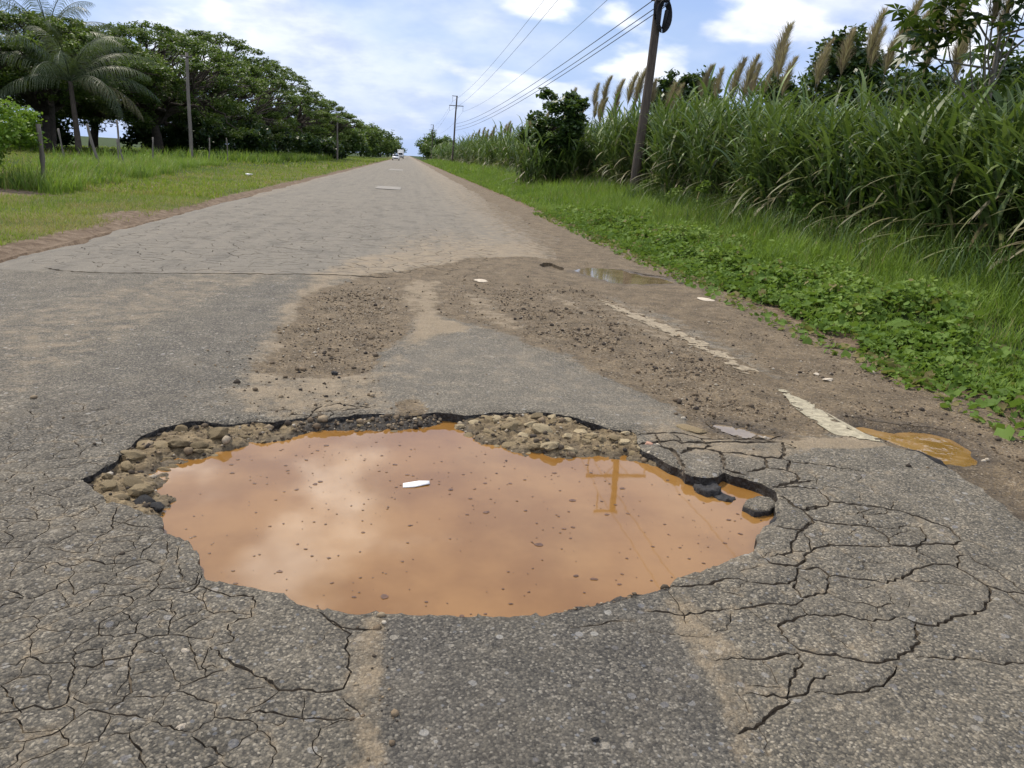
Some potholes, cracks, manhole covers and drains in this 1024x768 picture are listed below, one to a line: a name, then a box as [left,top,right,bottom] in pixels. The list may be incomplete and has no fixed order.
crack [0,403,372,768]
crack [637,432,1024,755]
pothole [574,268,679,285]
pothole [81,412,778,617]
pothole [842,416,988,467]
crack [575,620,634,628]
